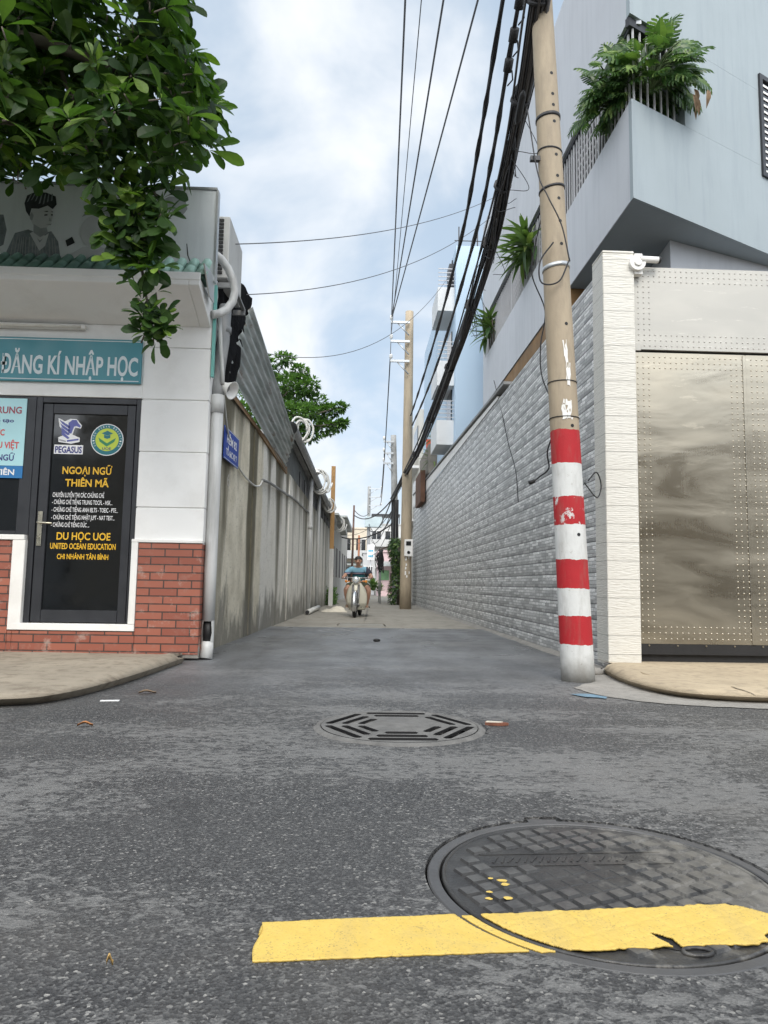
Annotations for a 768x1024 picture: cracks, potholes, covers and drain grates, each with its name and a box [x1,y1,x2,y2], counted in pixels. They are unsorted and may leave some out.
manhole cover [427,819,768,977]
manhole cover [313,711,486,747]
